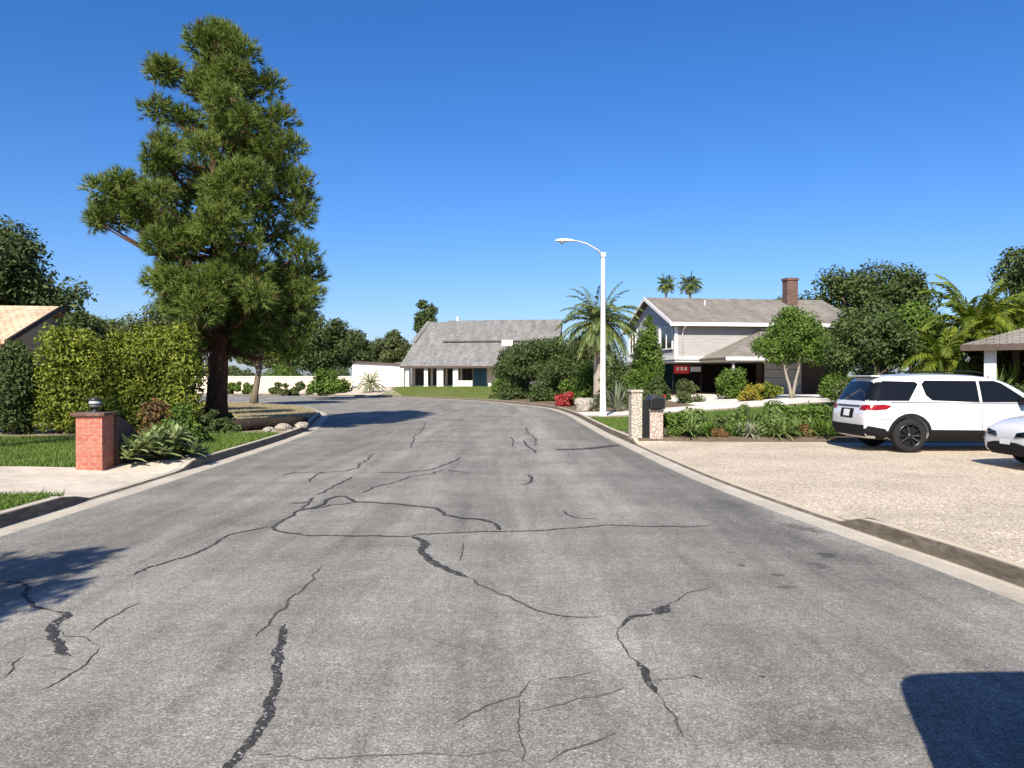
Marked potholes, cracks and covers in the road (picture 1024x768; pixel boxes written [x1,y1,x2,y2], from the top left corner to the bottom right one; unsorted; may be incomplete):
crack [252,587,711,761]
crack [511,427,538,453]
crack [0,581,138,691]
crack [283,422,533,493]
crack [256,566,322,635]
